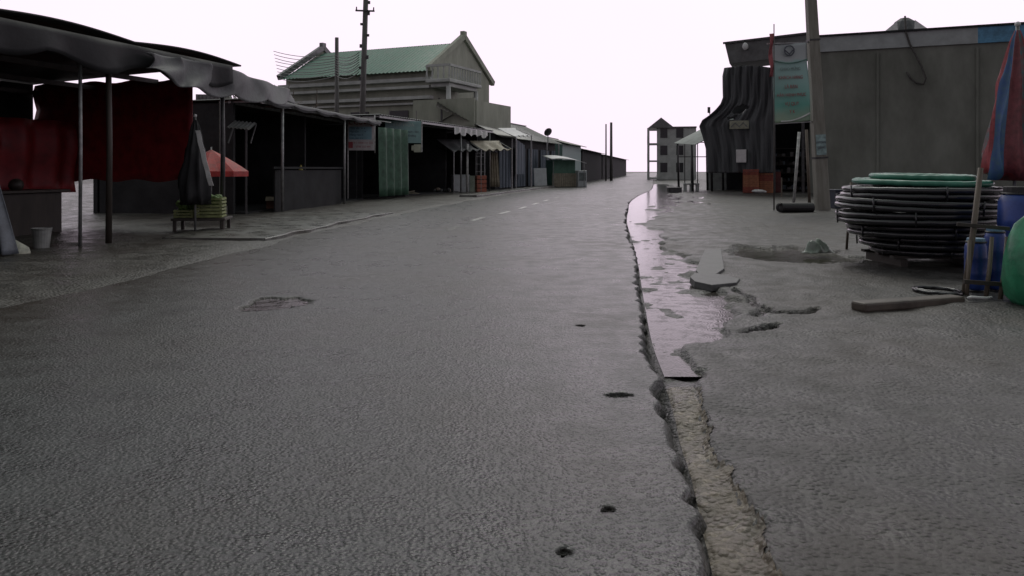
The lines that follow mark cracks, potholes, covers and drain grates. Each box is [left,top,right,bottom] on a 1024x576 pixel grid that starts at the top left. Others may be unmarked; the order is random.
pothole [725,243,873,264]
pothole [239,296,315,311]
pothole [555,548,573,558]
